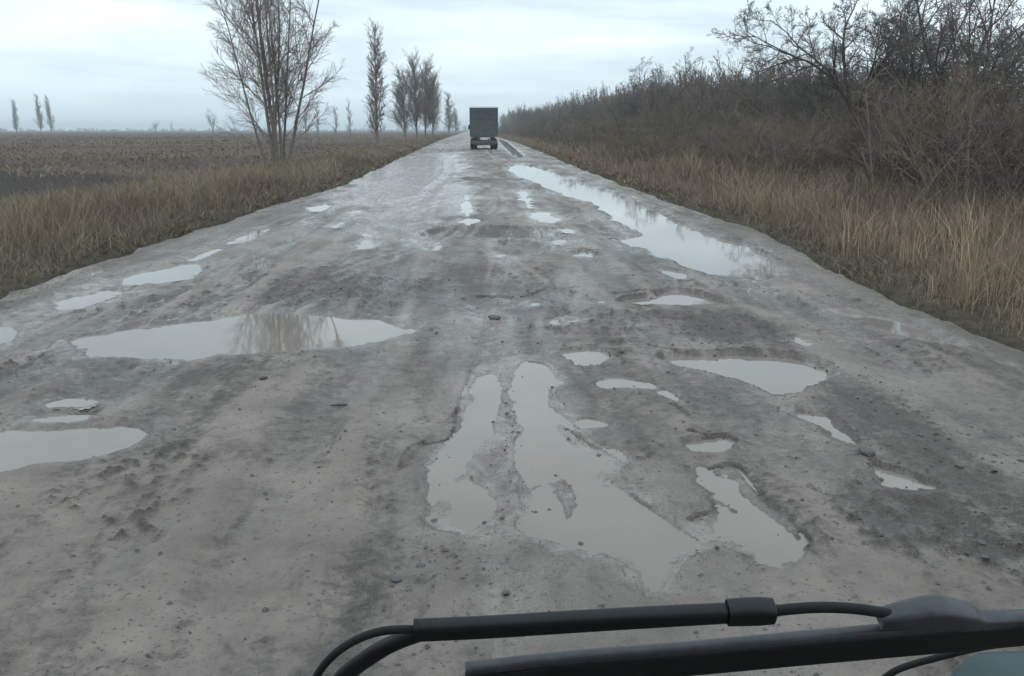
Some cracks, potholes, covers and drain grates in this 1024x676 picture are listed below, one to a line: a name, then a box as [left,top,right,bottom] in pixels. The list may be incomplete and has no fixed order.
pothole [0,415,160,472]
pothole [504,163,791,280]
pothole [423,374,506,532]
pothole [45,397,100,410]
pothole [559,344,612,366]
pothole [104,258,211,285]
pothole [506,361,810,593]
pothole [870,457,948,491]
pothole [658,346,840,395]
pothole [616,286,736,305]
pothole [65,306,427,362]
